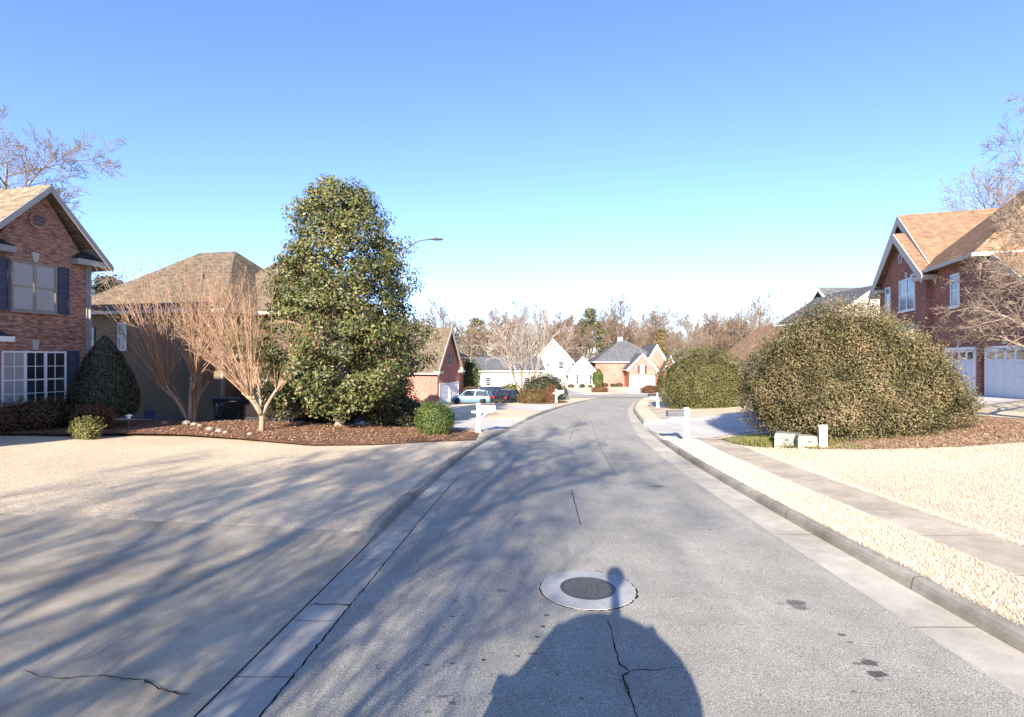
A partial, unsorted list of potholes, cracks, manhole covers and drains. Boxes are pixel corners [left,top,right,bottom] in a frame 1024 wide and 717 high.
manhole cover [539,570,638,611]
crack [607,620,676,717]
crack [19,670,187,694]
